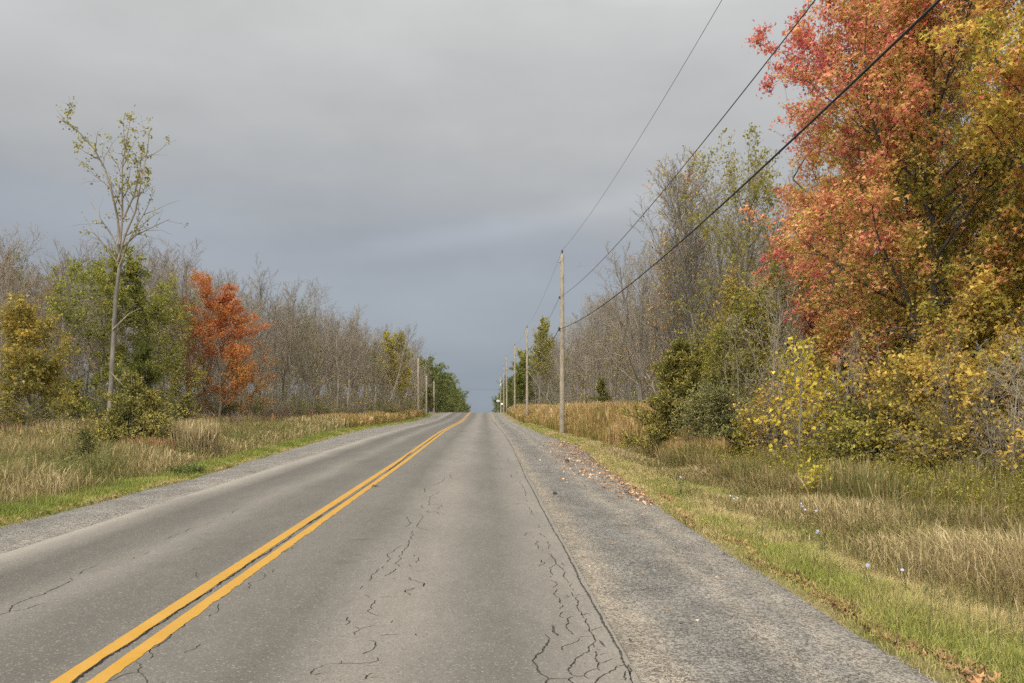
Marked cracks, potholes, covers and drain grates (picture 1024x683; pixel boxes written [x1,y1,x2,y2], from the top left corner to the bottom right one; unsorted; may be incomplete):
crack [310,476,452,680]
crack [0,508,239,615]
crack [494,423,633,683]
